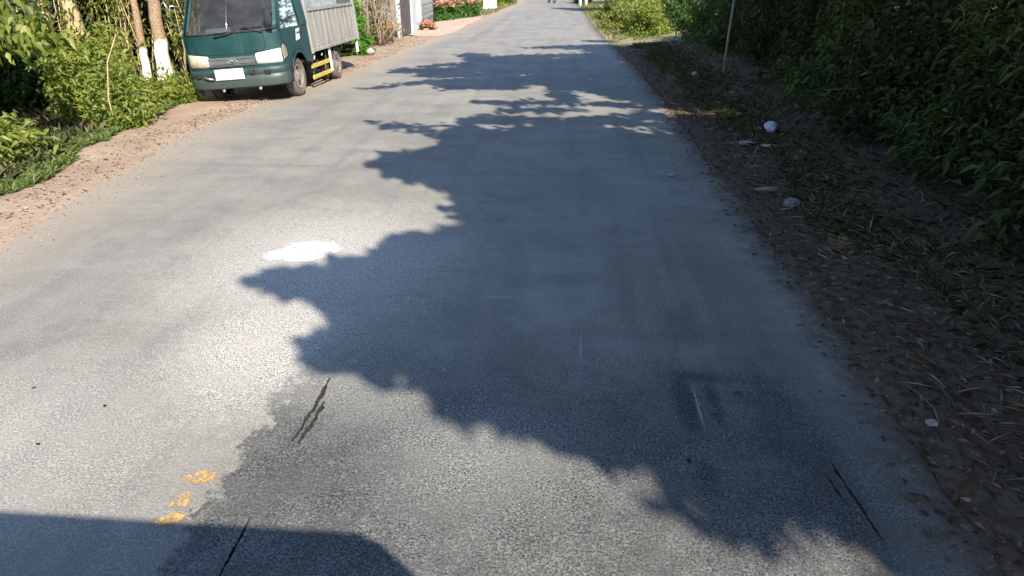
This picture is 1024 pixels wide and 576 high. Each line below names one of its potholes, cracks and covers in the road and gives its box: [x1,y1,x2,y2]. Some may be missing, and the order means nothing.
crack [291,377,331,444]
crack [219,516,252,576]
crack [825,463,882,540]
